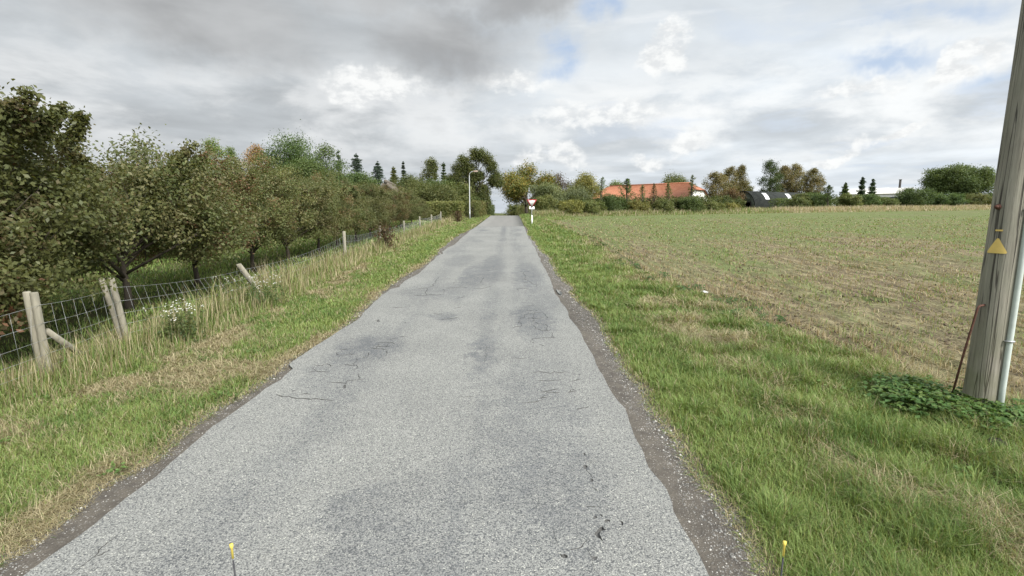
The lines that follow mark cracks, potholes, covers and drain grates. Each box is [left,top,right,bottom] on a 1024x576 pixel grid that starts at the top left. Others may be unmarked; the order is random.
crack [519,358,589,410]
crack [417,273,491,320]
crack [513,272,554,340]
crack [276,307,406,401]
